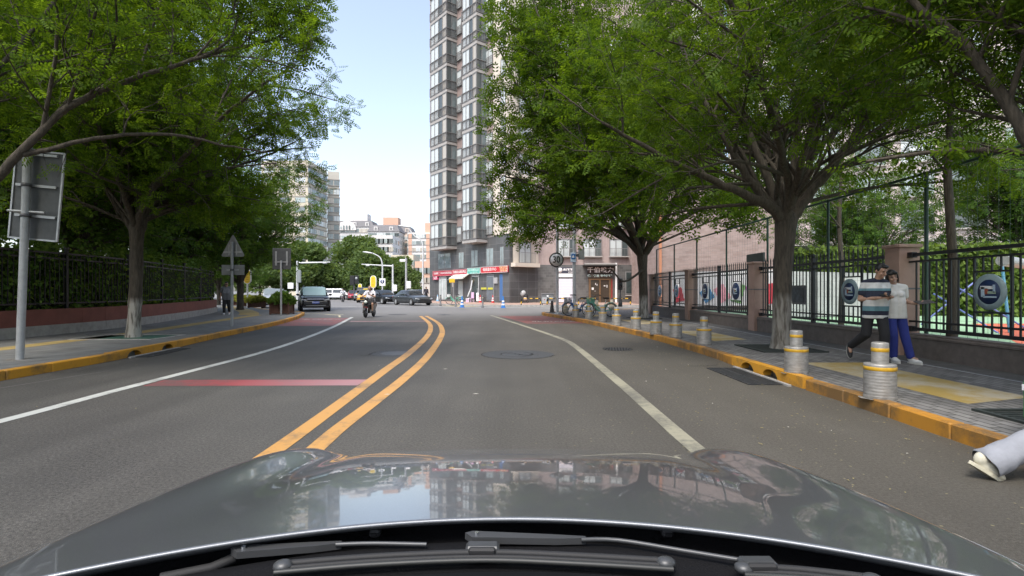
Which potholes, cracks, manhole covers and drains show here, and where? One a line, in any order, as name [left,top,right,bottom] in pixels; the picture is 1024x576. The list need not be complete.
drain grate [707,356,814,389]
manhole cover [481,350,554,359]
drain grate [105,340,190,359]
